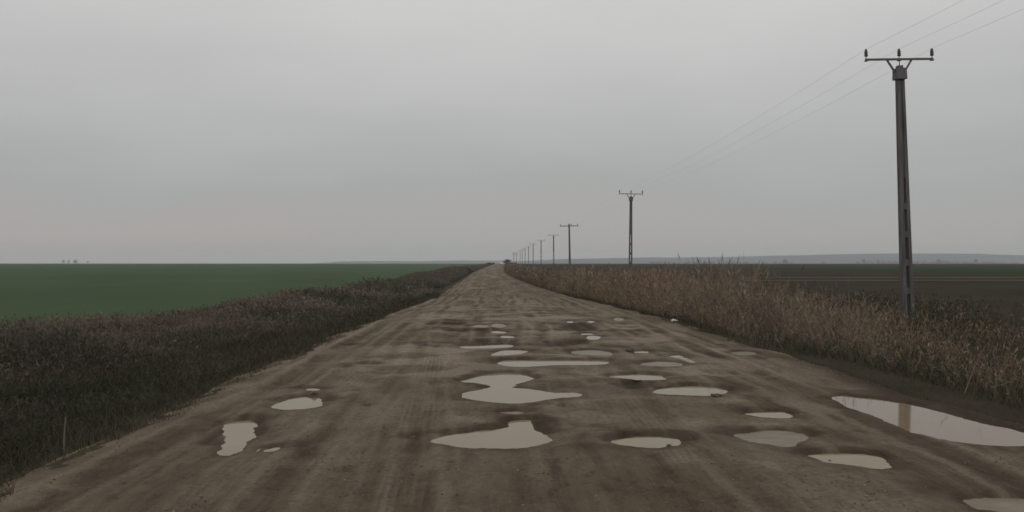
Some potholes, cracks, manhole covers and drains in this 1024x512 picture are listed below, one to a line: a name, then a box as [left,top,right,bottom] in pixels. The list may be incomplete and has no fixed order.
pothole [620,378,783,404]
pothole [547,346,640,357]
